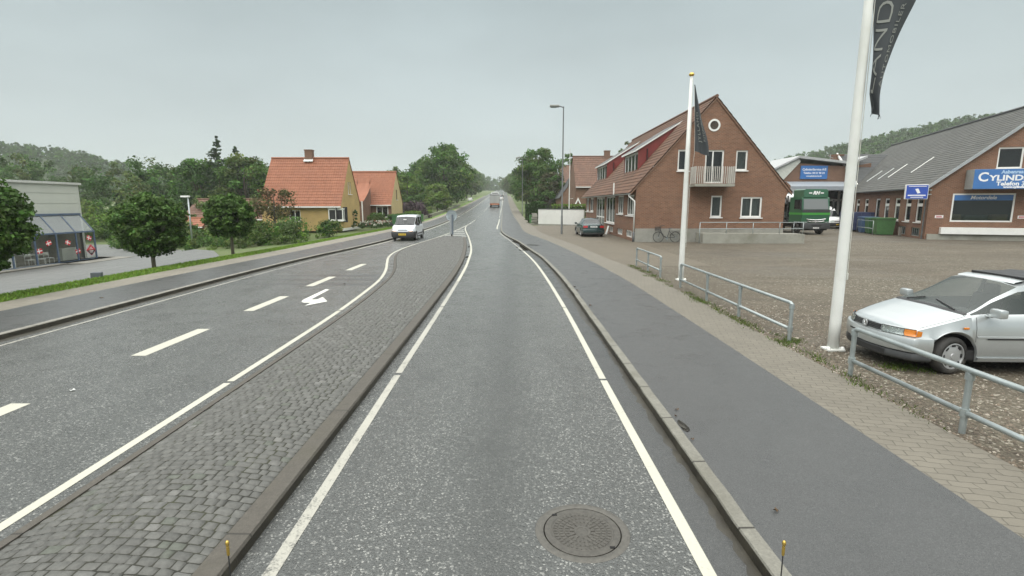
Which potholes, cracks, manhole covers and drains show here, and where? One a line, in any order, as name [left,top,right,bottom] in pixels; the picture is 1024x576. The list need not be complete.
manhole cover [535,504,630,564]
